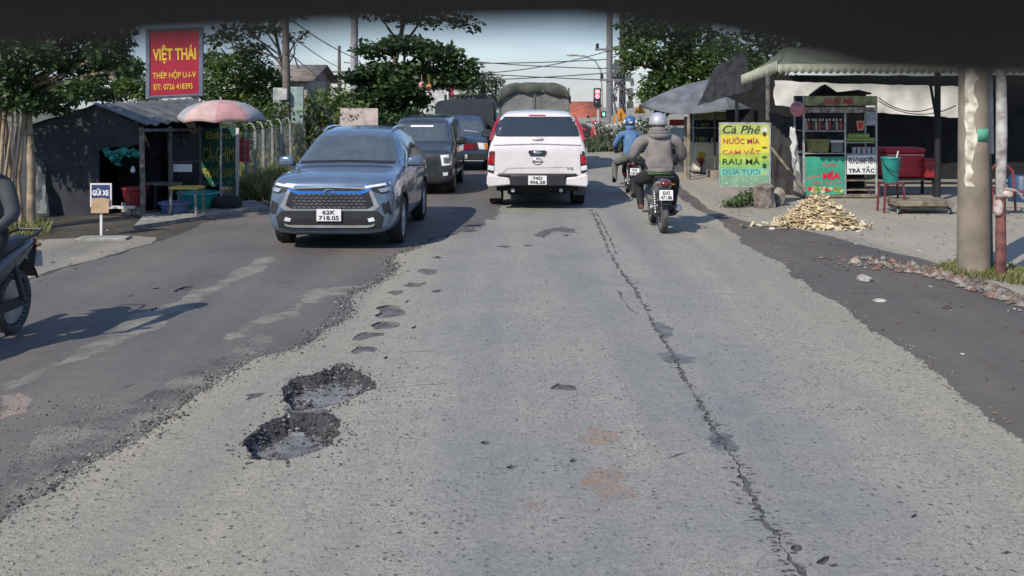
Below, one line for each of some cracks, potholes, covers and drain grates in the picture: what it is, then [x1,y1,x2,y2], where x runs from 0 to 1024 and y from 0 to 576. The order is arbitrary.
pothole [351,346,378,354]
pothole [551,383,578,391]
pothole [241,411,341,461]
crack [590,210,817,576]
pothole [352,332,384,341]
pothole [281,366,377,410]
pothole [371,322,400,330]
pothole [375,305,405,318]
